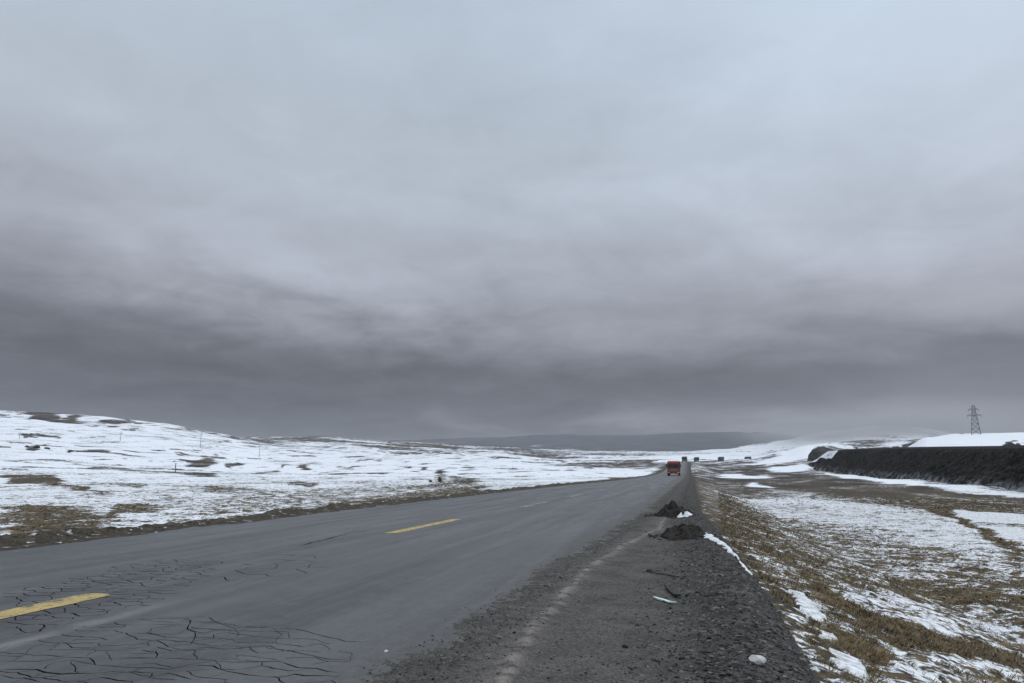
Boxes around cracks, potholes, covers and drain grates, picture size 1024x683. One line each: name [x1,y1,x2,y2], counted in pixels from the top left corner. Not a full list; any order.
crack [224,529,361,583]
crack [5,560,222,633]
